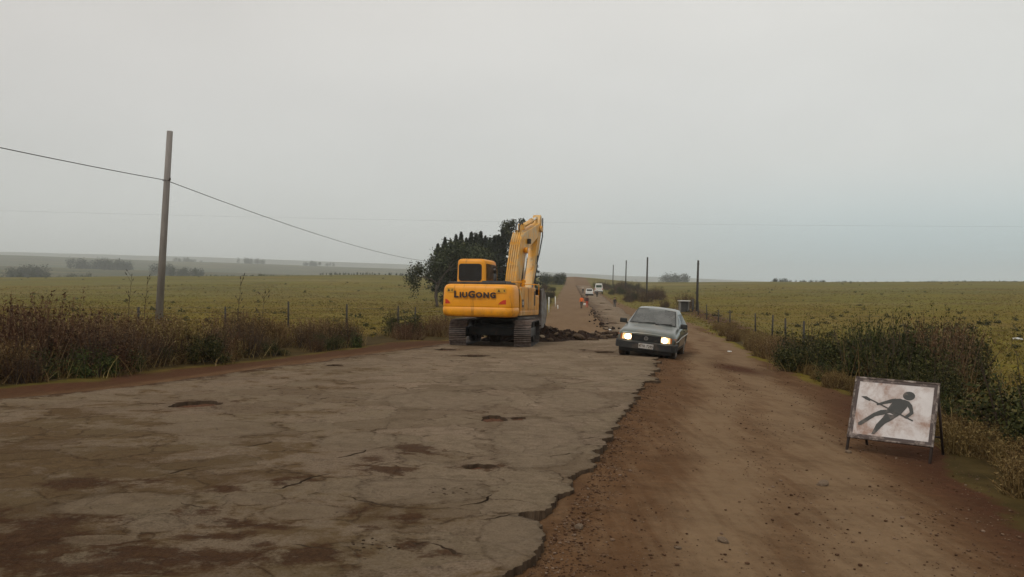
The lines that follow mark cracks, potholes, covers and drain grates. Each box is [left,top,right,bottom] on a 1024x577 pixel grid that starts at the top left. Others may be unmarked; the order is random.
crack [411,541,467,555]
crack [258,450,366,489]
crack [461,495,516,520]
